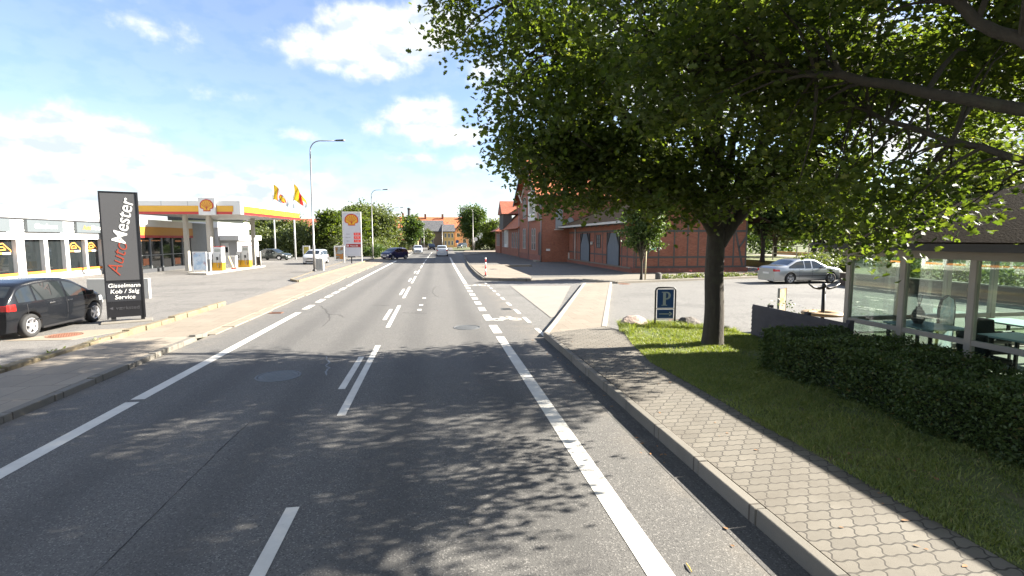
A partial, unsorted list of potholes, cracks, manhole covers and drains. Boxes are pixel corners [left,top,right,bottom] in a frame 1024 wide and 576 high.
manhole cover [254,370,302,382]
